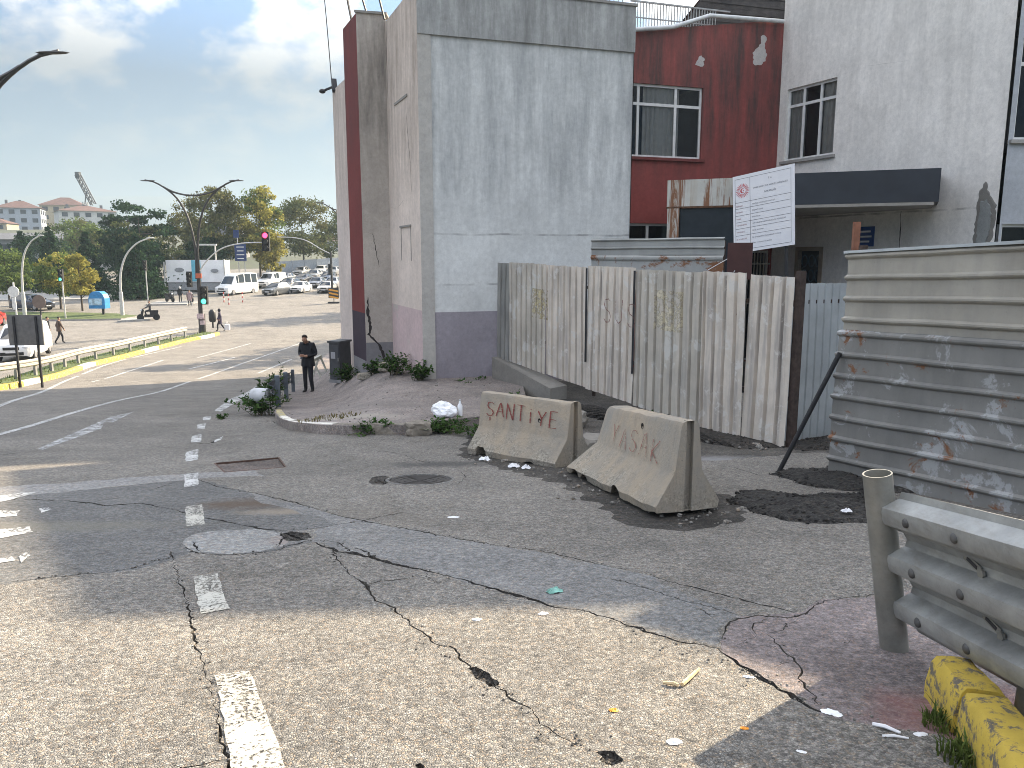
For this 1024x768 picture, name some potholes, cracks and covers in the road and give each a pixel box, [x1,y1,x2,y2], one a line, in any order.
manhole cover [385,474,455,485]
pothole [468,667,499,687]
crack [14,479,872,768]
manhole cover [214,457,286,472]
pothole [280,531,312,541]
